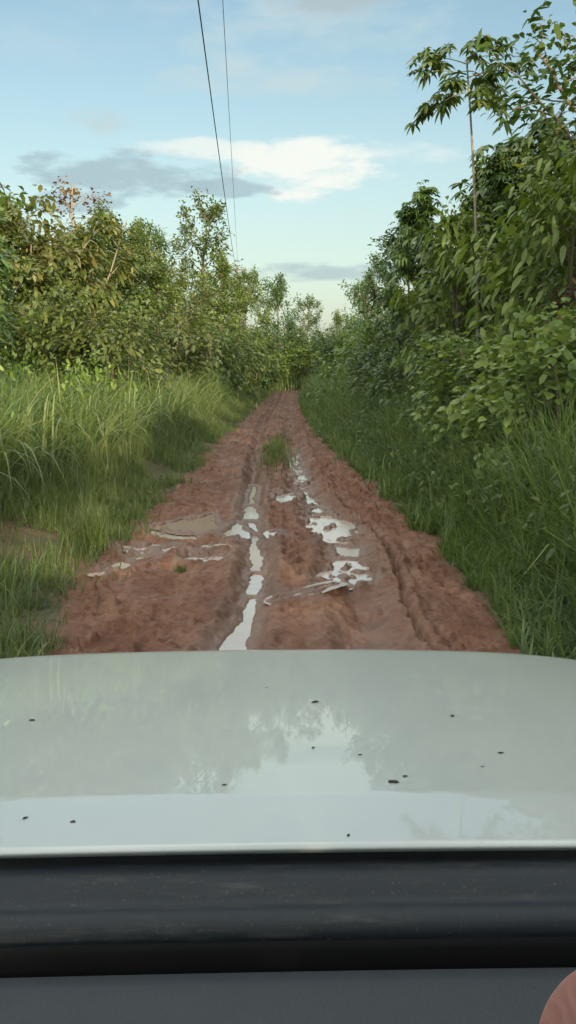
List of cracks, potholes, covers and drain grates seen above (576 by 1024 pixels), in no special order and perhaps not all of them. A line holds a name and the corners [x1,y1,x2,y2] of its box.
pothole [305,506,360,542]
pothole [150,513,219,538]
pothole [307,556,375,592]
